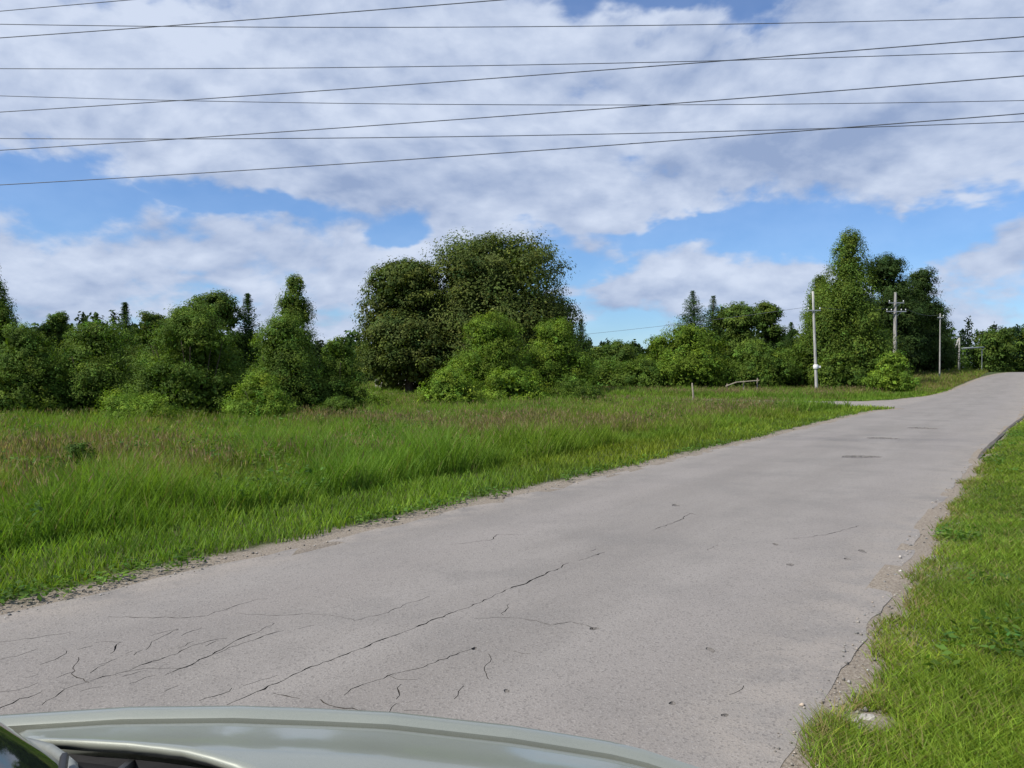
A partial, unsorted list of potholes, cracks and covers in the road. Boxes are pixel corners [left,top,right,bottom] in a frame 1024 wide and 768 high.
crack [0,550,604,708]
